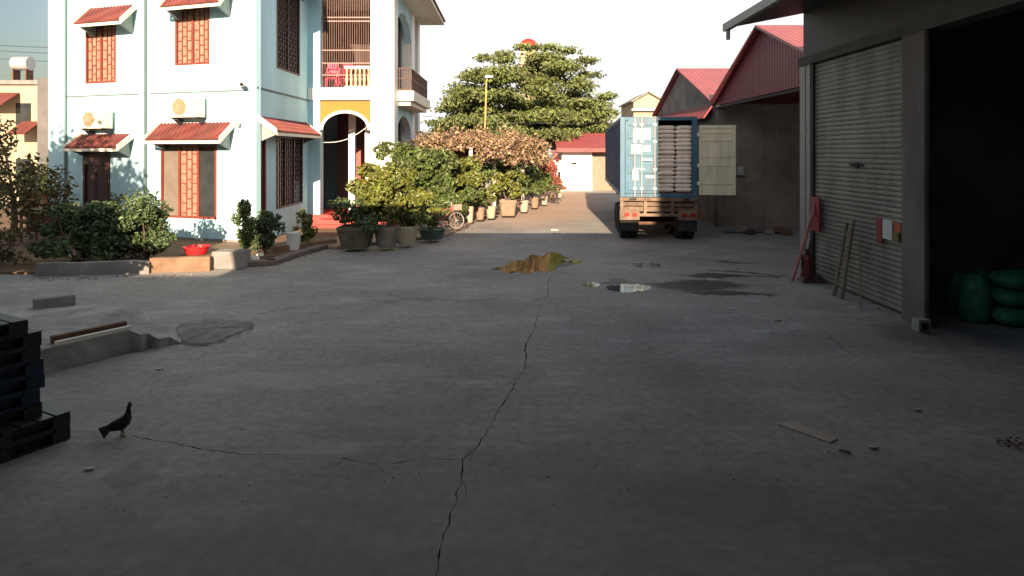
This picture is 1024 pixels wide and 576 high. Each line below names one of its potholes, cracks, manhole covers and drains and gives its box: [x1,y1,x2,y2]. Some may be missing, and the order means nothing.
crack [131,275,580,576]
